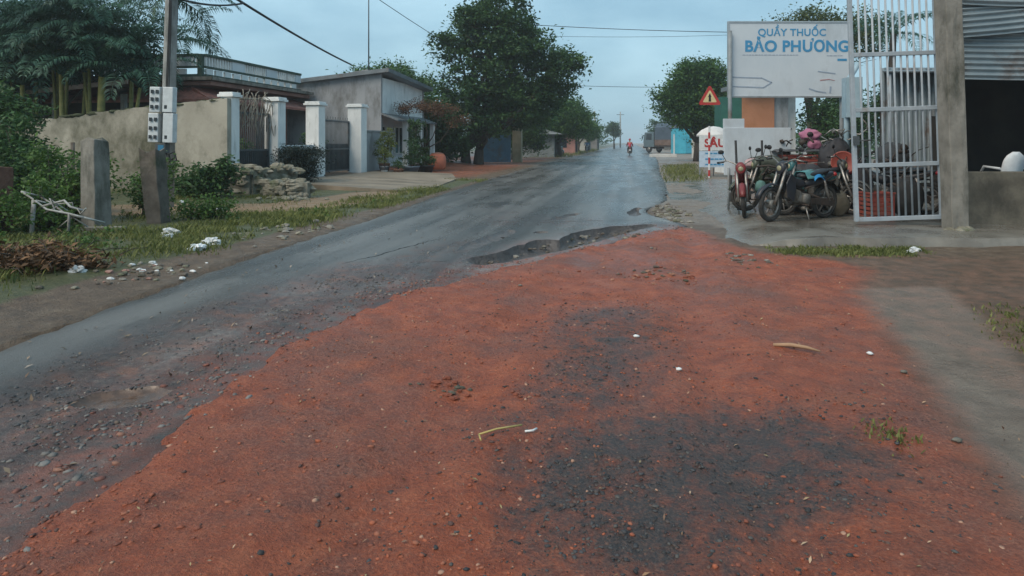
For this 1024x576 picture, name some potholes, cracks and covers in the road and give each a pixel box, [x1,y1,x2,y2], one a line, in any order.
pothole [461,224,657,265]
pothole [69,386,173,409]
